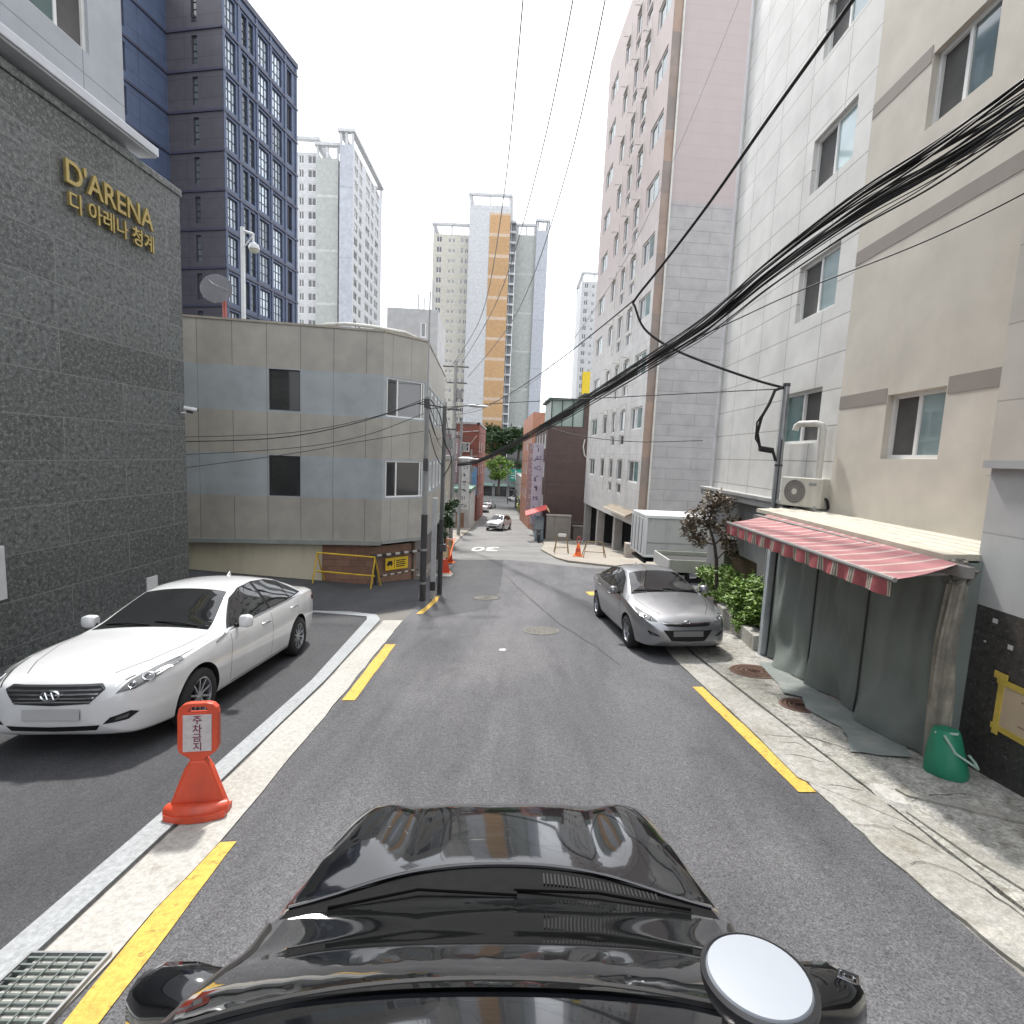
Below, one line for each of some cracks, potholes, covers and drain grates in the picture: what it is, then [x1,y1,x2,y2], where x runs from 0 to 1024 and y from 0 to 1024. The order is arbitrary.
crack [853,823,1024,916]
drain grate [0,951,112,1024]
manhole cover [523,626,559,635]
manhole cover [729,664,772,679]
manhole cover [779,698,813,713]
